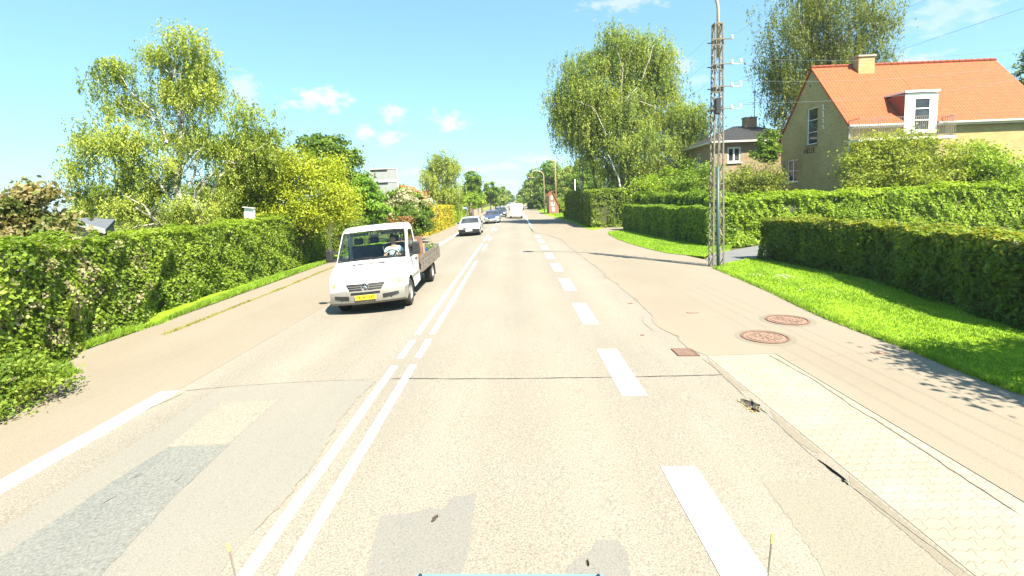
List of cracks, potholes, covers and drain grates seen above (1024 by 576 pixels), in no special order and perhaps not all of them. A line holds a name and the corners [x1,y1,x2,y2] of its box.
manhole cover [759,314,817,327]
manhole cover [734,330,797,346]
